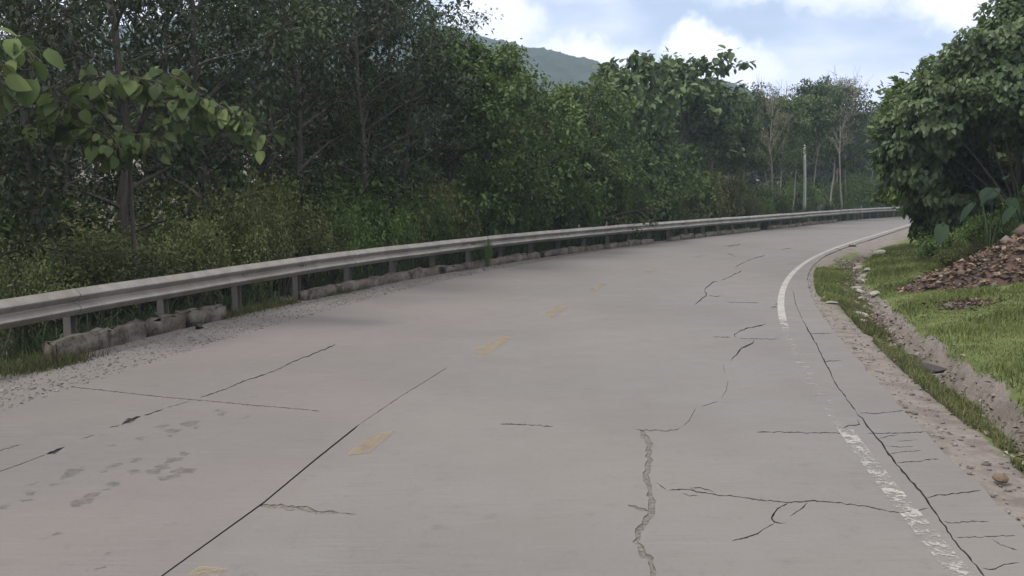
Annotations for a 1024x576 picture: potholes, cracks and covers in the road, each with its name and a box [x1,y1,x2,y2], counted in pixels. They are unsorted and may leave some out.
crack [628,324,981,576]
crack [259,503,350,515]
crack [944,521,1020,570]
crack [696,244,764,304]
crack [2,344,335,471]
